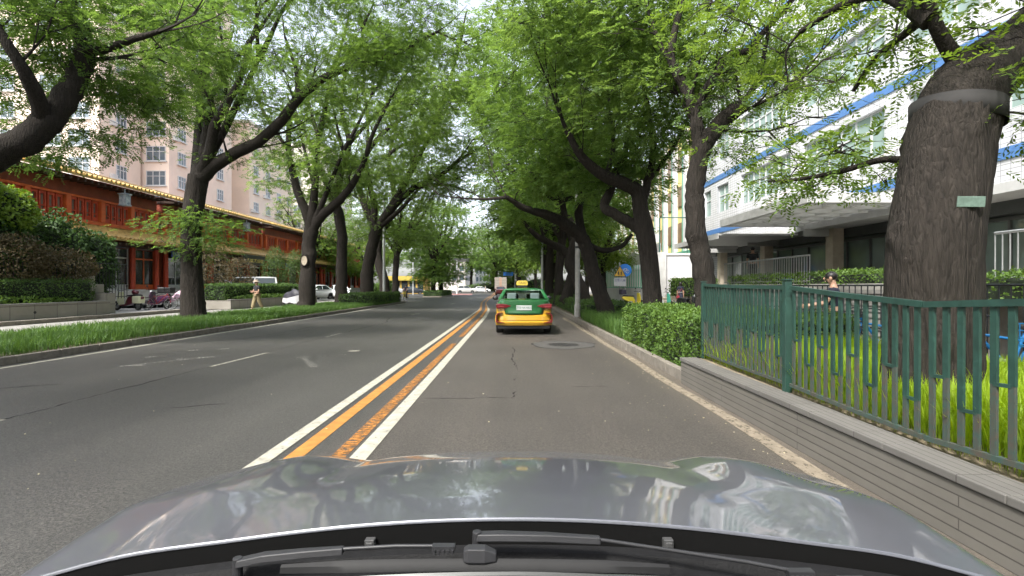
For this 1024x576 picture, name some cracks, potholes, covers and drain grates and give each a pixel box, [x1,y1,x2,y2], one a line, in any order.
crack [438,336,522,399]
manhole cover [531,341,596,349]
